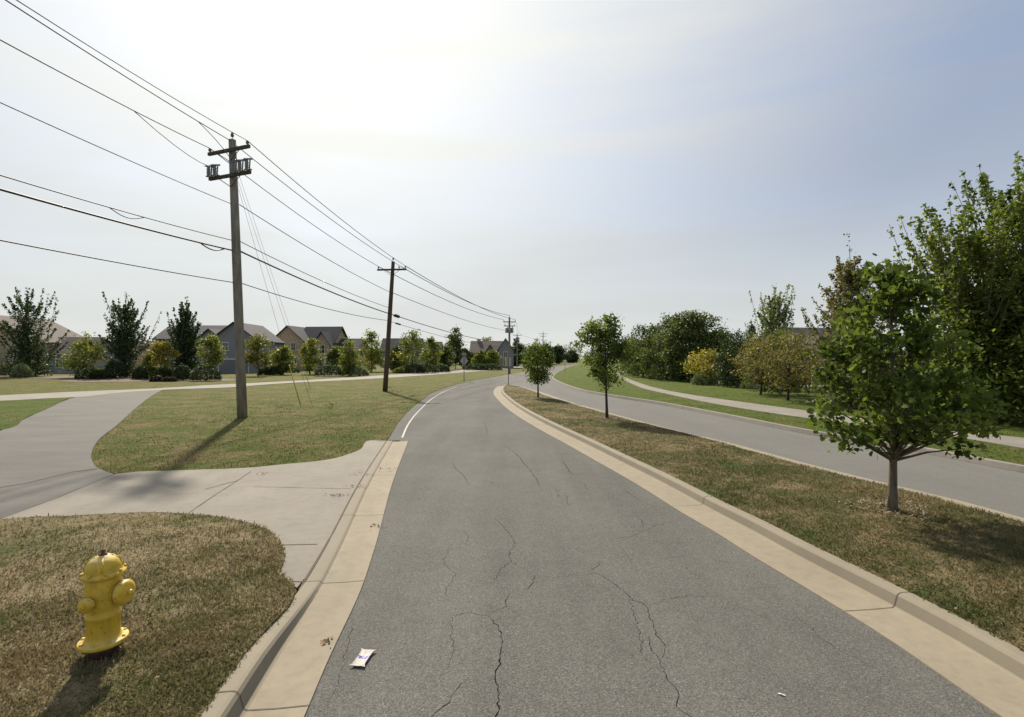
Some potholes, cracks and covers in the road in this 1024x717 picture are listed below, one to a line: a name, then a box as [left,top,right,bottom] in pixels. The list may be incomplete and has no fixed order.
crack [433,521,704,717]
